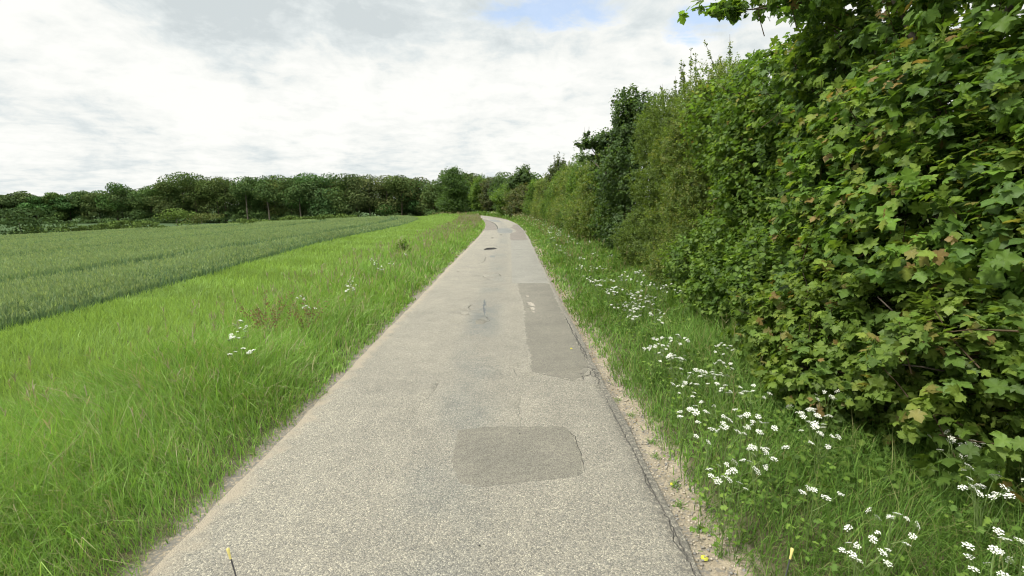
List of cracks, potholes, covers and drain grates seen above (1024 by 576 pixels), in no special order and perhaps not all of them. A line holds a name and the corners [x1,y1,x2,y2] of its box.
crack [564,315,696,576]
